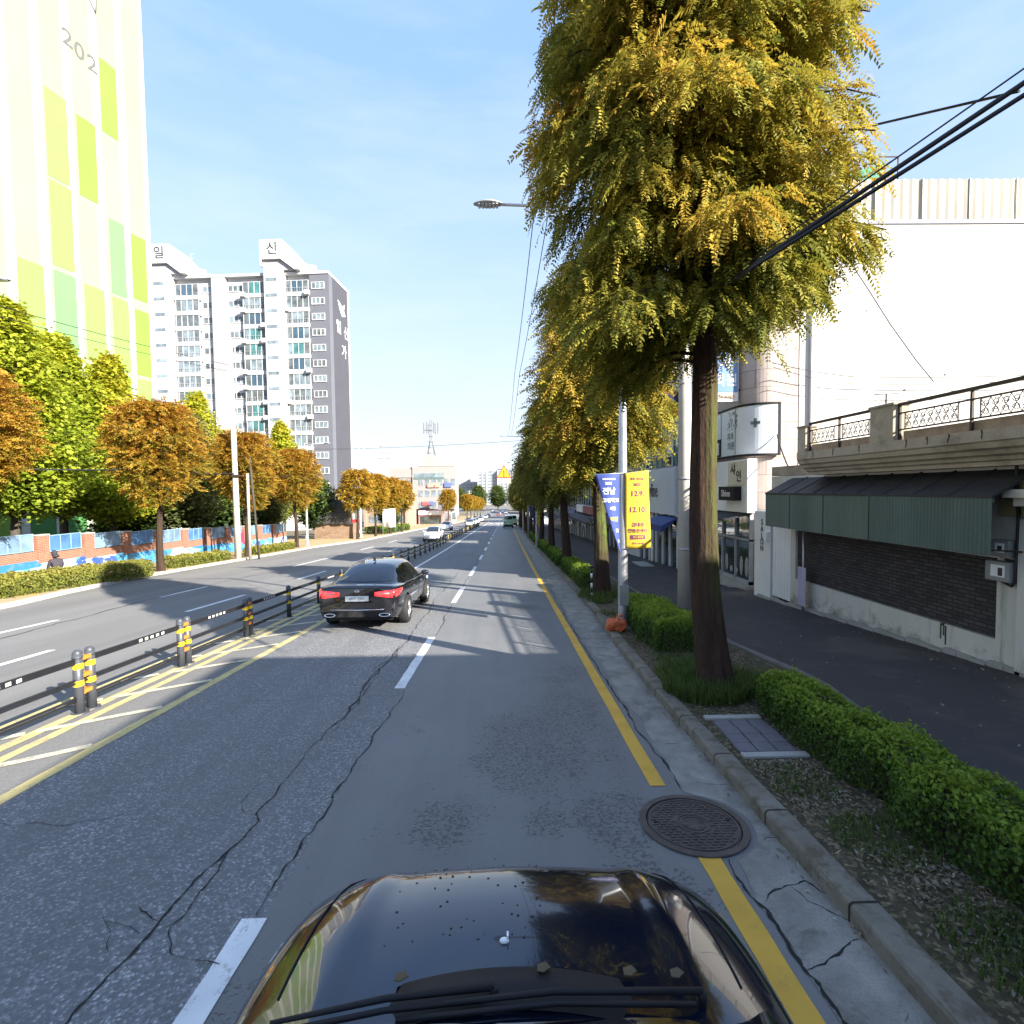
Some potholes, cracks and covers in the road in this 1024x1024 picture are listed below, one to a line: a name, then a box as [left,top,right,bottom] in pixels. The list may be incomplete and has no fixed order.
crack [765,880,847,920]
crack [65,559,469,1024]
manhole cover [639,795,751,859]
crack [807,939,858,970]
